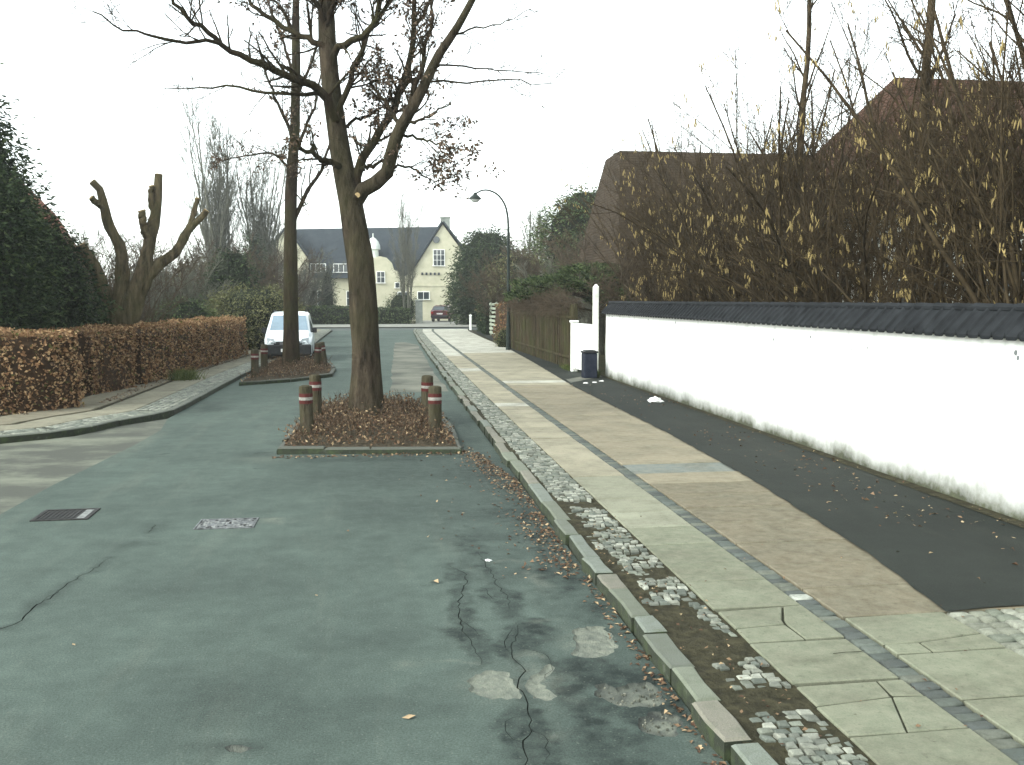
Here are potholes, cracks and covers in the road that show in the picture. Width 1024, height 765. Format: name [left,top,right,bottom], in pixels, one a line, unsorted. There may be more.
crack [736,608,805,640]
crack [457,550,552,765]
crack [815,681,914,733]
crack [1,562,103,629]
manhole cover [193,517,259,530]
